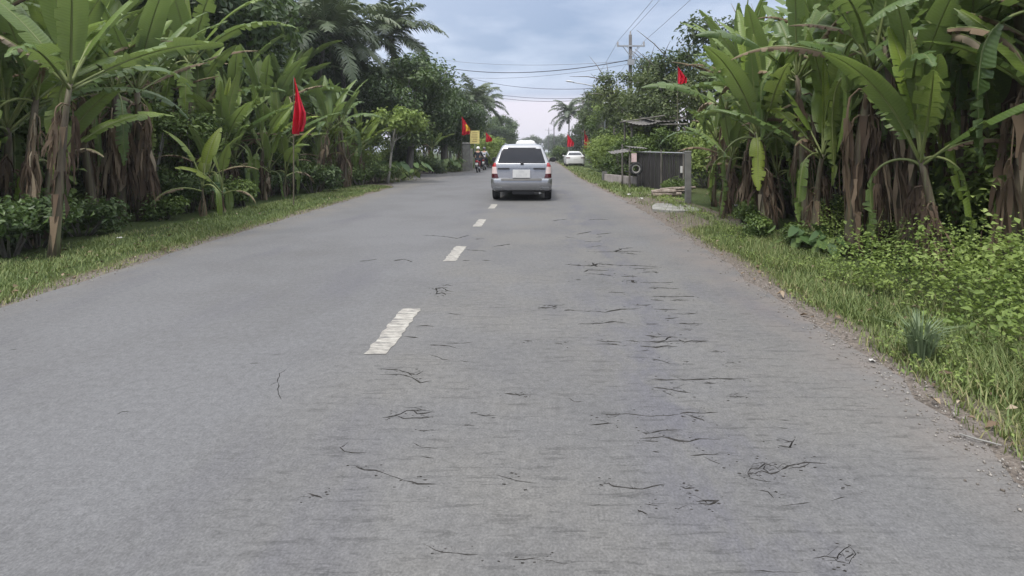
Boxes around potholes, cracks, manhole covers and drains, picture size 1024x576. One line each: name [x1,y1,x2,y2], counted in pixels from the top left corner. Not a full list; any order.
crack [755,543,861,573]
crack [591,477,721,514]
crack [424,544,563,567]
crack [384,342,470,383]
crack [340,444,431,488]
crack [384,407,438,458]
crack [539,219,862,506]
crack [403,285,458,338]
